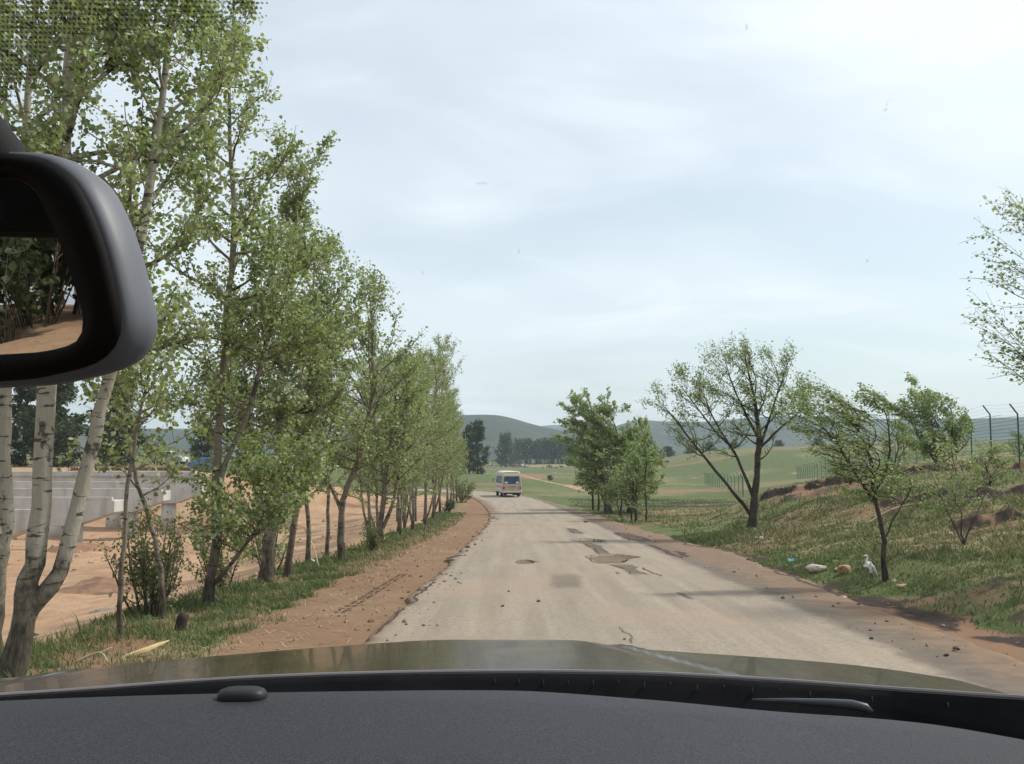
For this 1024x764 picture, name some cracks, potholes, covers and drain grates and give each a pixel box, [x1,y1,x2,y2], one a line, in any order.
pothole [586,554,640,563]
